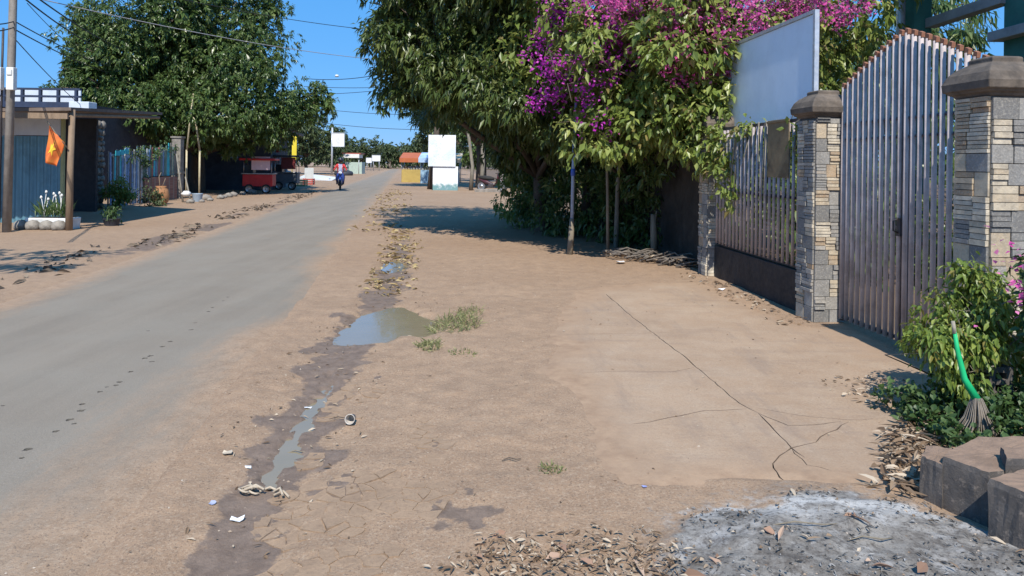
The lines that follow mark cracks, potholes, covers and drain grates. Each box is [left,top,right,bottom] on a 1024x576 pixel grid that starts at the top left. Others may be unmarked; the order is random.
crack [563,294,867,480]
